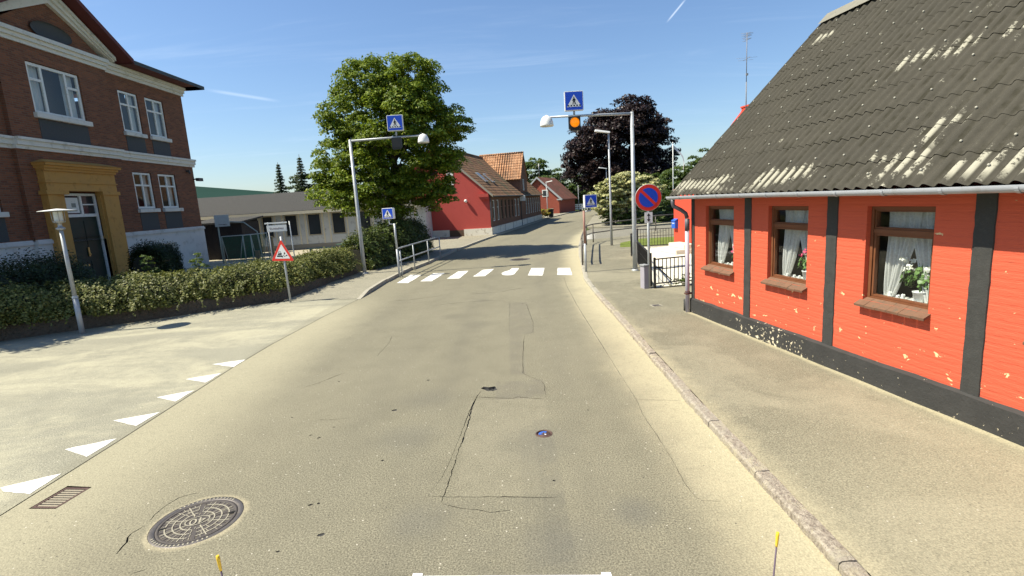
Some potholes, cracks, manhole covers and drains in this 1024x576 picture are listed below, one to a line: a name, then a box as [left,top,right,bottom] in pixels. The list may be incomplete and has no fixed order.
drain grate [31,487,89,509]
crack [117,493,196,553]
manhole cover [535,430,553,438]
manhole cover [147,497,244,548]
